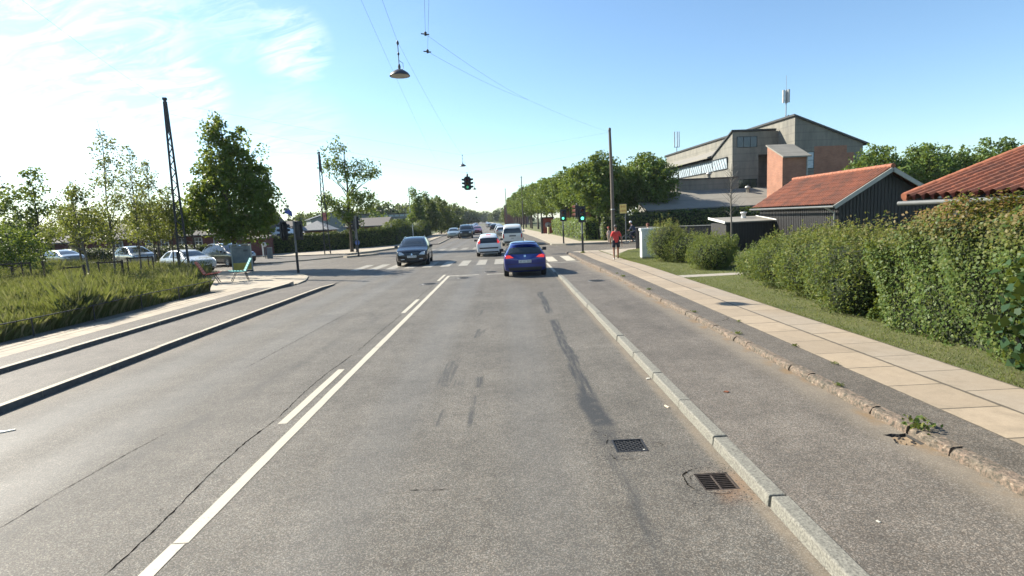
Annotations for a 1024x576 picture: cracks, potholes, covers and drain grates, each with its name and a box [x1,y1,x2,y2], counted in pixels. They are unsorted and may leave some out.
drain grate [694,473,740,491]
pothole [885,433,924,446]
